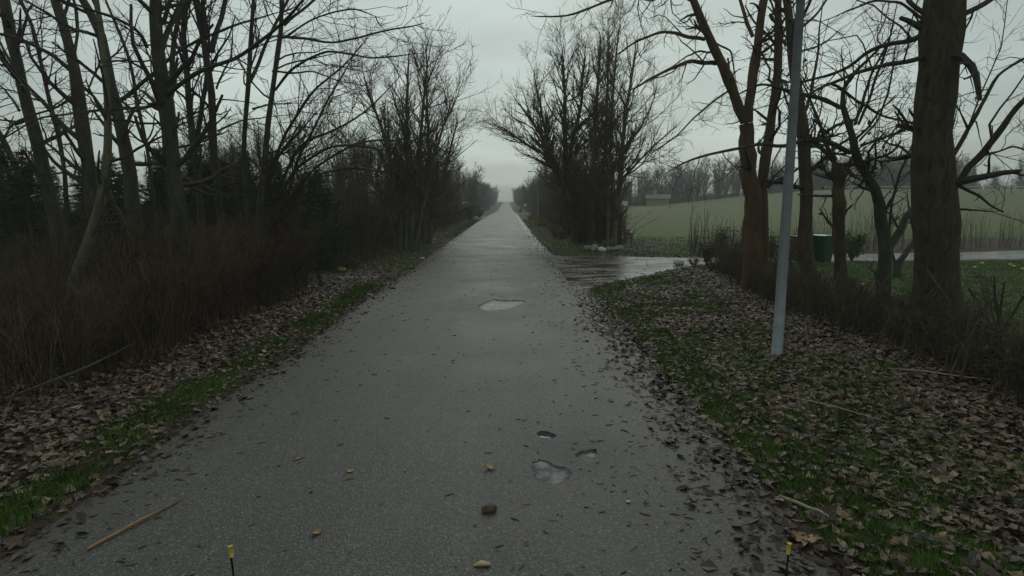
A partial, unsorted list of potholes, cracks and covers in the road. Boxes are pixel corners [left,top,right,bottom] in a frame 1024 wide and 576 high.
pothole [531,459,573,484]
pothole [478,299,525,311]
pothole [574,449,597,461]
